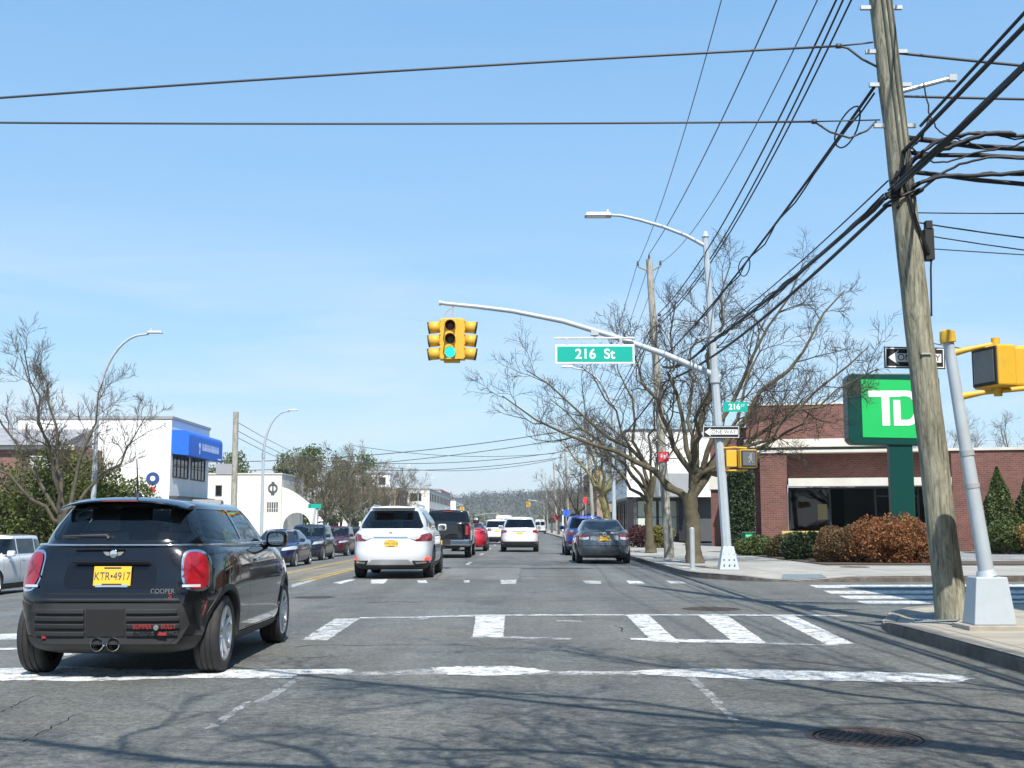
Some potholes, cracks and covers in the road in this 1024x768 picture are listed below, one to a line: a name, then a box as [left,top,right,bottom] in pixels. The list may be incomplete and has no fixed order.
manhole cover [804,726,933,749]
